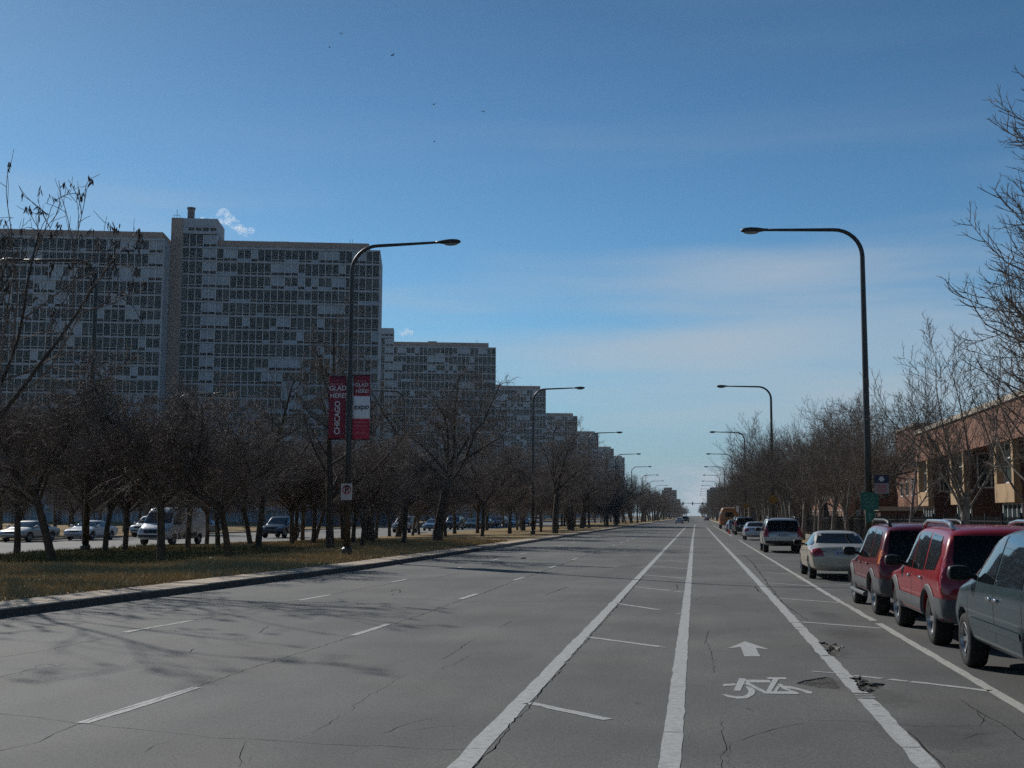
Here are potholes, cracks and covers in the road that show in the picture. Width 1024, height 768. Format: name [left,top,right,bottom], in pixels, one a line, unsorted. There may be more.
pothole [820,642,844,657]
pothole [850,675,885,693]
pothole [796,677,841,690]
